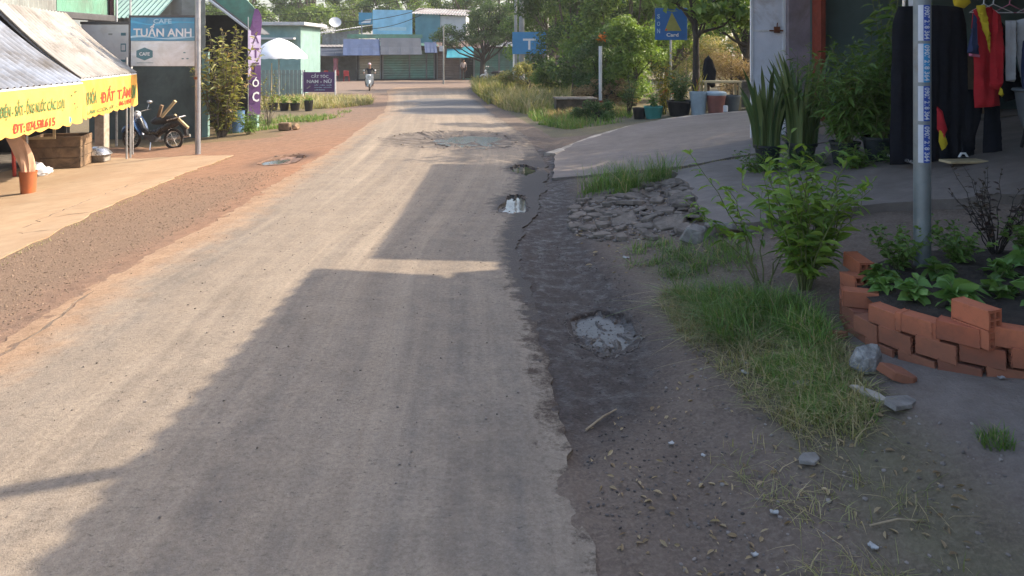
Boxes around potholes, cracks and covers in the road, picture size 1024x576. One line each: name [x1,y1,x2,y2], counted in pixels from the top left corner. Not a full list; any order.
pothole [562,306,645,359]
pothole [506,164,539,176]
pothole [496,194,530,213]
pothole [258,153,305,166]
pothole [378,130,517,150]
crack [3,291,93,353]
